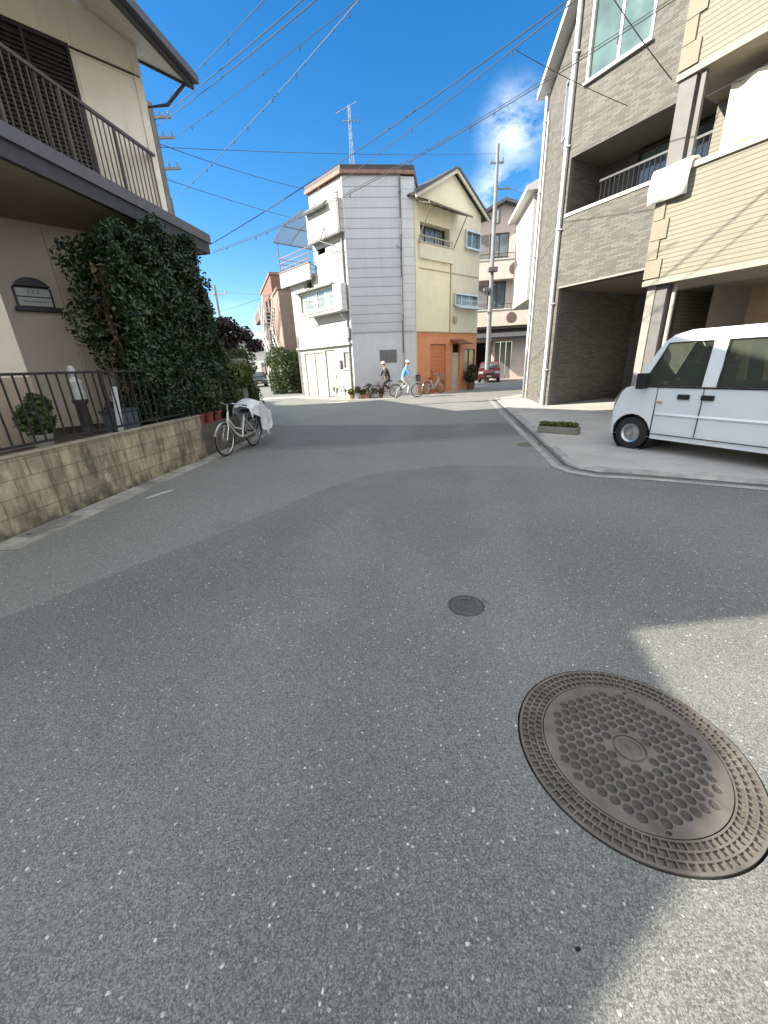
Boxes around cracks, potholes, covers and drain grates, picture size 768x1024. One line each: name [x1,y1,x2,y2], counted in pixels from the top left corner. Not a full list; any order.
manhole cover [518,671,768,880]
manhole cover [447,595,485,617]
